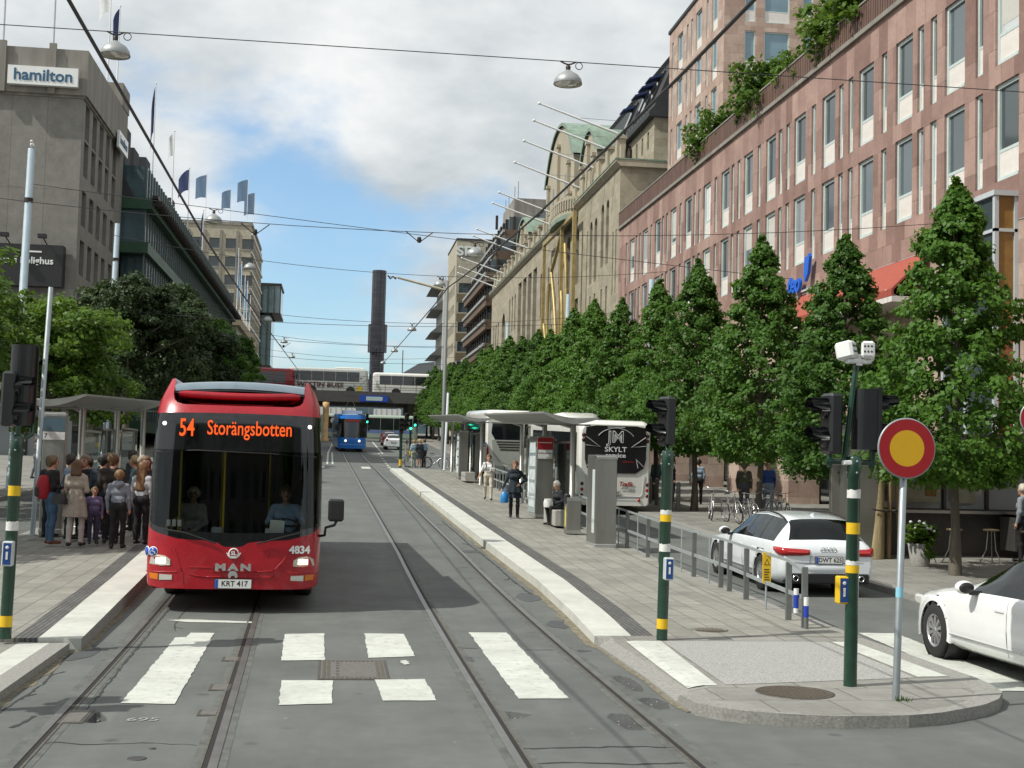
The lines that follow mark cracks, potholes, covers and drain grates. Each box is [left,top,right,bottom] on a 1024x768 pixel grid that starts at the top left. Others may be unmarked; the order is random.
manhole cover [317,660,390,680]
manhole cover [755,685,835,700]
